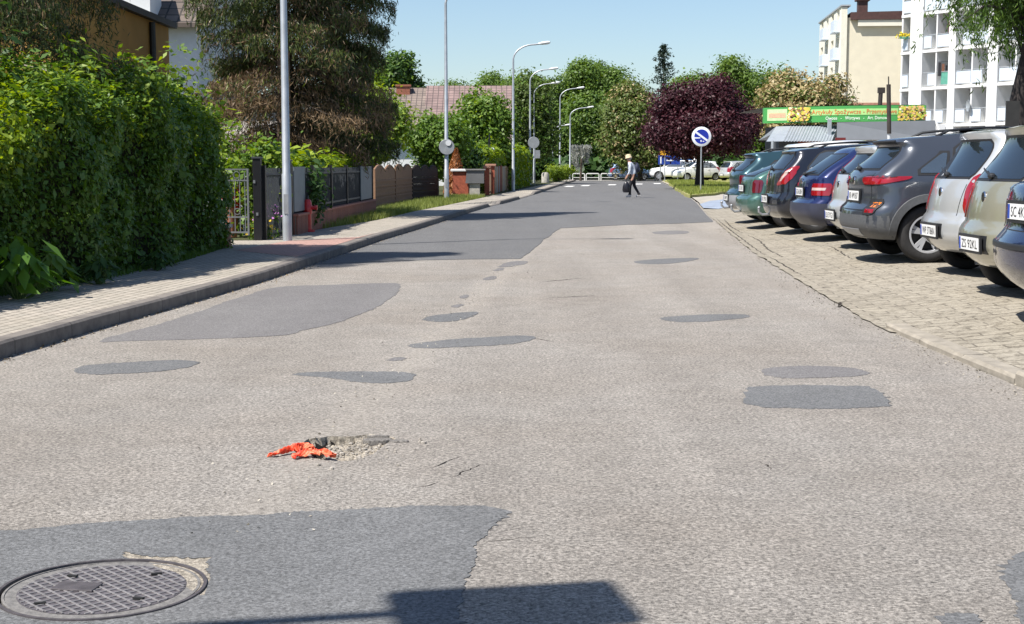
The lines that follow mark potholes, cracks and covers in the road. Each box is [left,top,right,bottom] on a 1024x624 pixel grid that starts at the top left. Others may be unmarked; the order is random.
pothole [304,434,428,470]
manhole cover [0,558,207,621]
crack [408,456,481,487]
